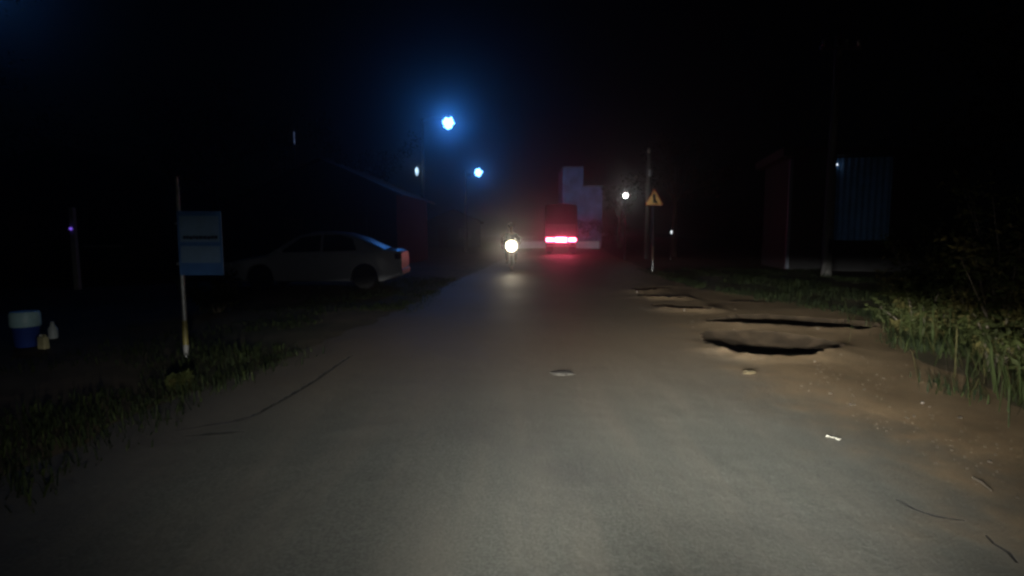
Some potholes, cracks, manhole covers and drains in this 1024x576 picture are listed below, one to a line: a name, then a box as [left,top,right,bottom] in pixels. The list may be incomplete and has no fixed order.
pothole [699,330,848,356]
crack [985,535,1018,563]
crack [175,354,354,436]
crack [895,499,965,521]
